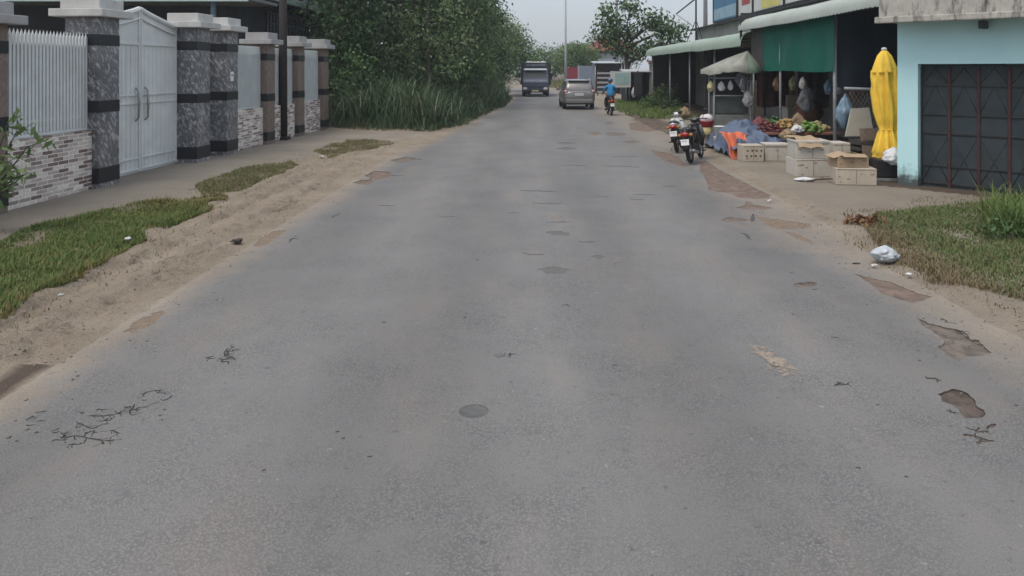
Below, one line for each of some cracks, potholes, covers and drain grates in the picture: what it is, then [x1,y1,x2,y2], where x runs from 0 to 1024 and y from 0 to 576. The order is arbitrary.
manhole cover [459,405,488,418]
pothole [353,171,390,185]
crack [205,344,241,365]
pothole [917,318,991,362]
crack [945,409,994,444]
pothole [938,389,986,418]
crack [26,388,173,448]
pothole [856,274,931,303]
